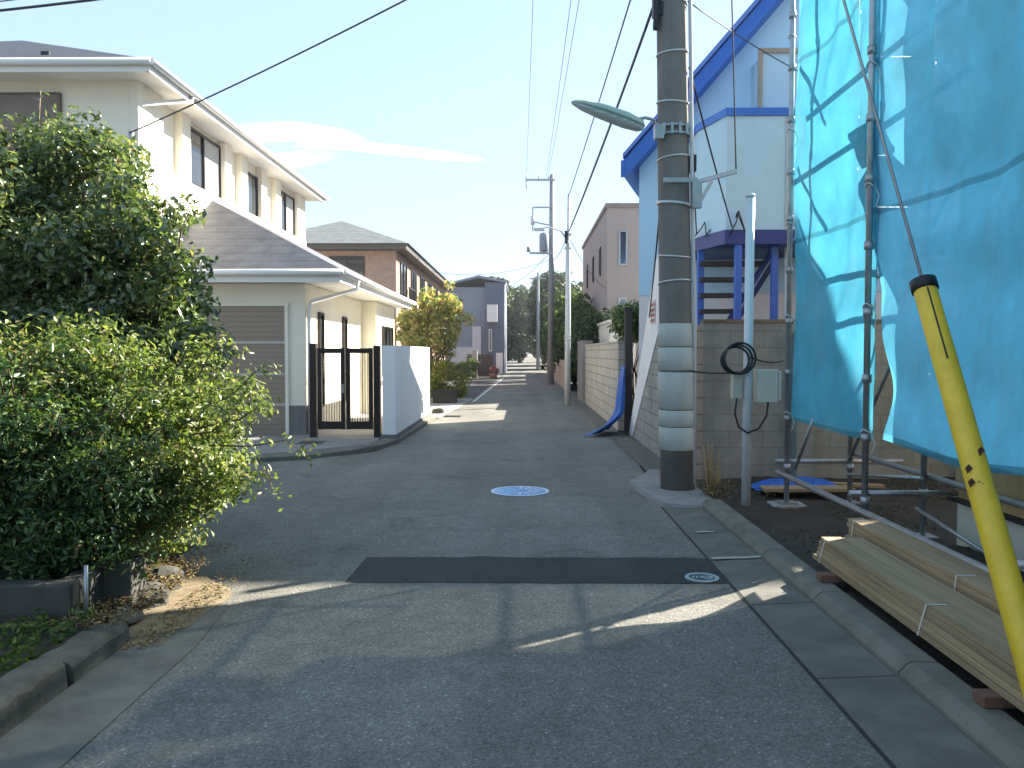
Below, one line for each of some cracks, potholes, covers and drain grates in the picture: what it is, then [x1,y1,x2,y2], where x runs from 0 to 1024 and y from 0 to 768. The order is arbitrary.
manhole cover [685,572,719,583]
manhole cover [488,486,552,497]
